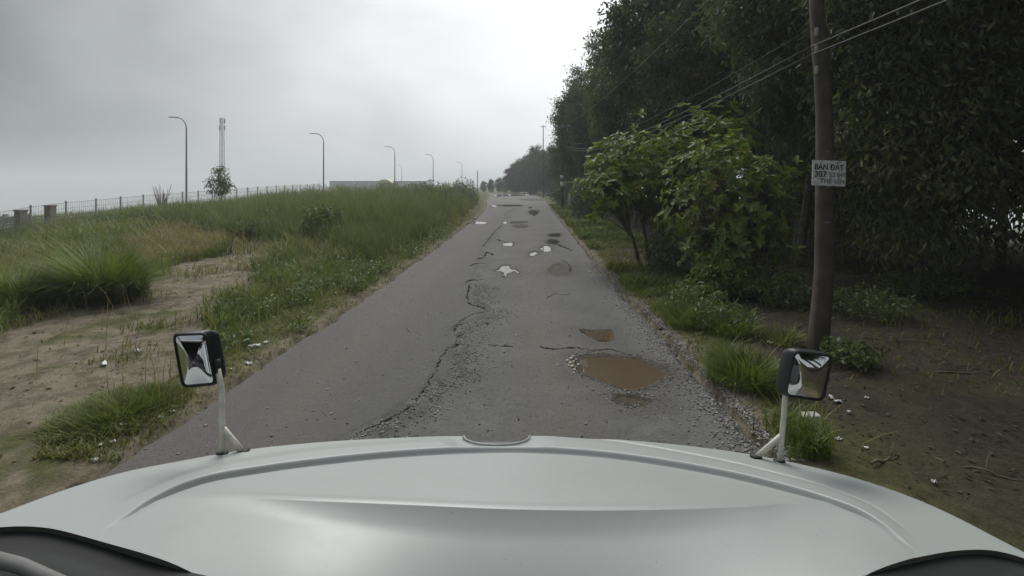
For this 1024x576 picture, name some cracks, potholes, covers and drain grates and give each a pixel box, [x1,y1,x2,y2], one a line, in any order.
pothole [573,354,674,392]
pothole [579,328,615,342]
pothole [611,394,654,406]
pothole [493,265,520,278]
crack [541,346,629,355]
pothole [547,262,573,275]
crack [364,207,518,431]
